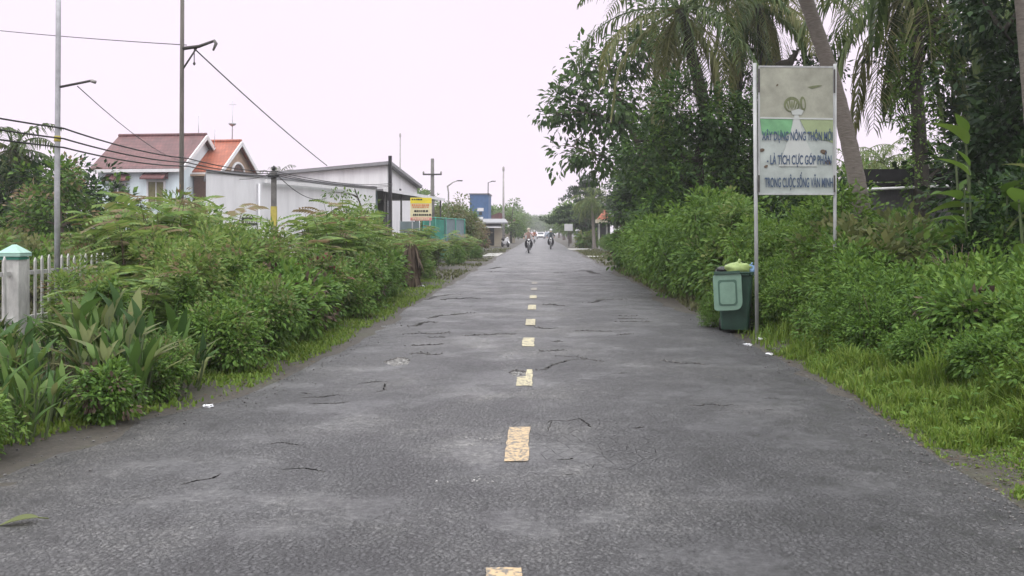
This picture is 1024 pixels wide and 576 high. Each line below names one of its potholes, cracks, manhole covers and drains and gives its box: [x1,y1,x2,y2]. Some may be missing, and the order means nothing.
crack [400,293,516,355]
pothole [383,357,410,366]
crack [181,473,221,485]
crack [534,298,652,373]
crack [537,417,669,475]
crack [301,393,349,404]
crack [659,359,723,378]
